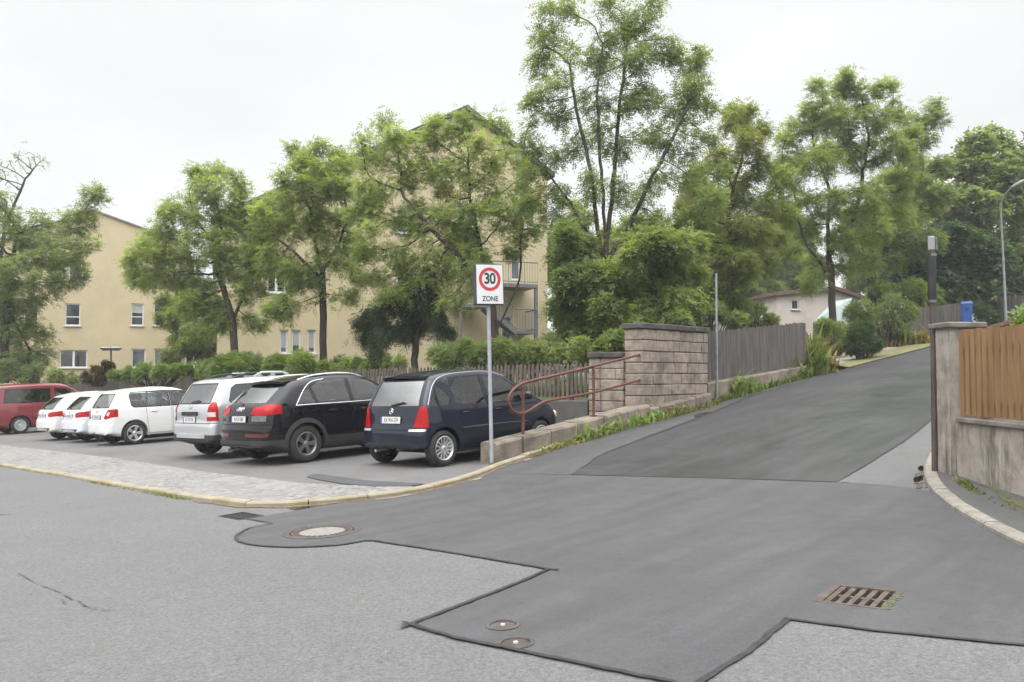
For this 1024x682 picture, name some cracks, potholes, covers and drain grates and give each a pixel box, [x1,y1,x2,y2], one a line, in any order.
manhole cover [485,619,520,630]
manhole cover [282,523,362,539]
crack [17,572,111,610]
drain grate [219,512,264,520]
drain grate [812,583,904,610]
manhole cover [497,636,535,648]
